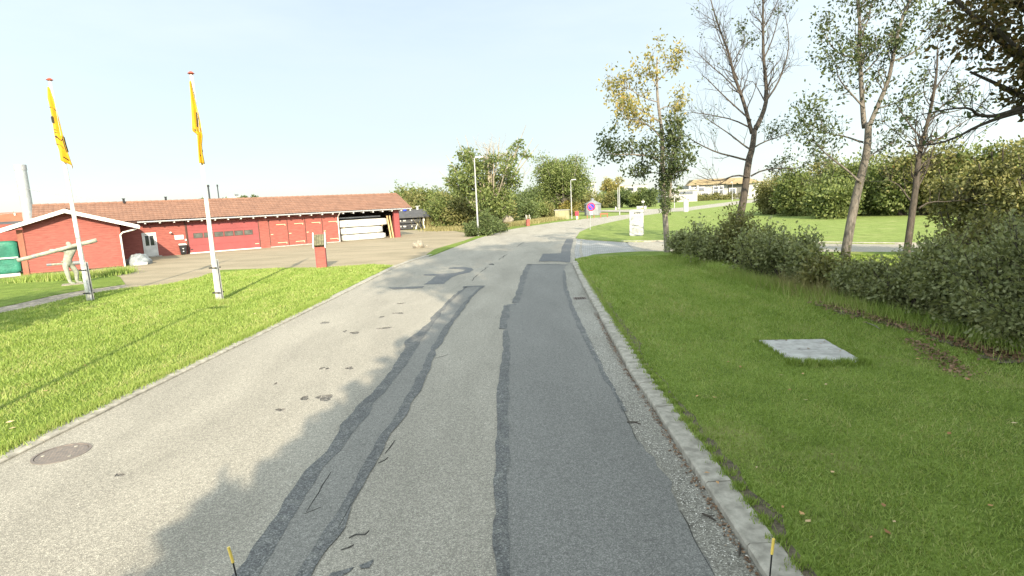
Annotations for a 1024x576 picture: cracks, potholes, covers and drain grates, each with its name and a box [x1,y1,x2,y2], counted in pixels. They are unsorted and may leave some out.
crack [339,494,369,550]
manhole cover [30,442,92,465]
